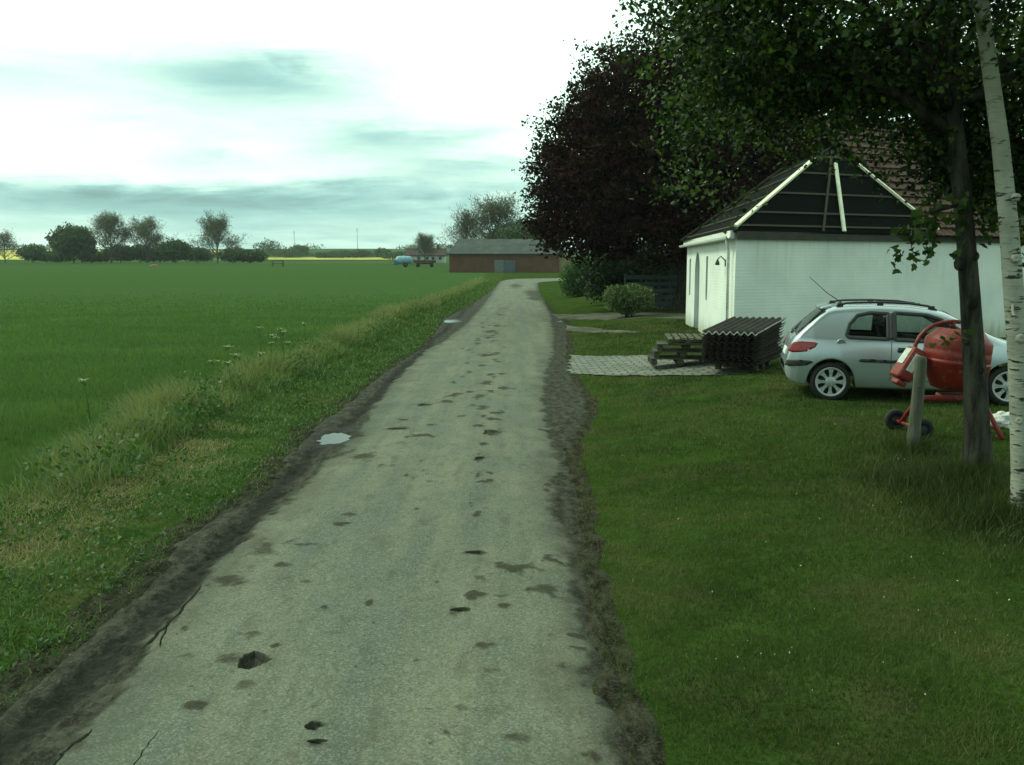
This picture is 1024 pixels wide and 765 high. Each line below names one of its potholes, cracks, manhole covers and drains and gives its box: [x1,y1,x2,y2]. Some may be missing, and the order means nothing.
pothole [304,721,325,730]
pothole [237,650,272,670]
crack [143,586,201,648]
crack [52,729,92,765]
